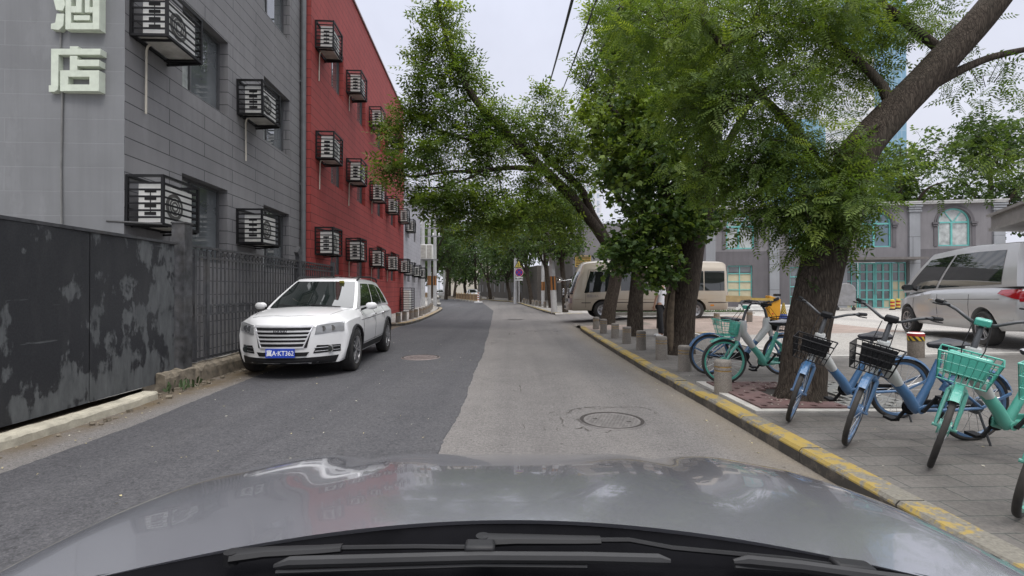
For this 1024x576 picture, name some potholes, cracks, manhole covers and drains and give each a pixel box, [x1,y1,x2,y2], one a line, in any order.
crack [523,405,660,432]
manhole cover [579,412,646,430]
